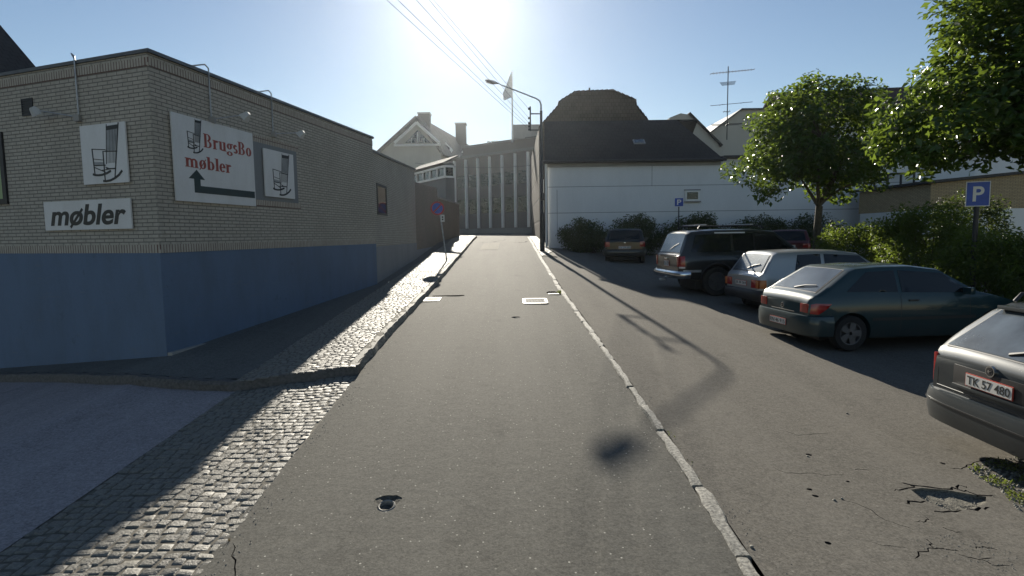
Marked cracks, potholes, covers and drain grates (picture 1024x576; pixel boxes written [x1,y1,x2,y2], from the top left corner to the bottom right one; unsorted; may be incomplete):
pothole [374,495,402,510]
crack [839,457,1009,566]
pothole [912,488,986,512]
